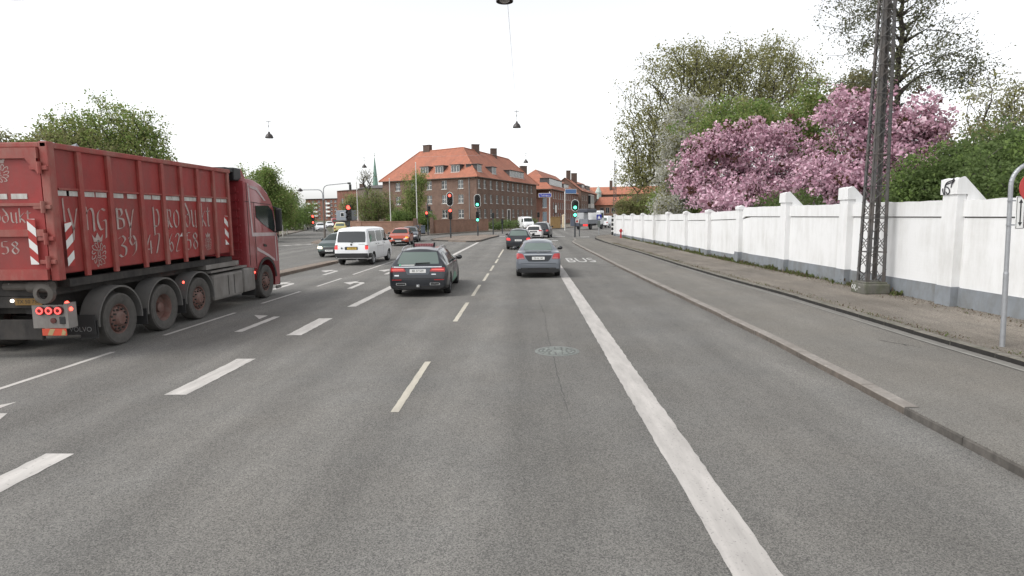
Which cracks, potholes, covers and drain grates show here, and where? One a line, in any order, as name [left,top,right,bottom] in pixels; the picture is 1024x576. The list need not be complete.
crack [539,301,571,418]
manhole cover [535,346,580,356]
